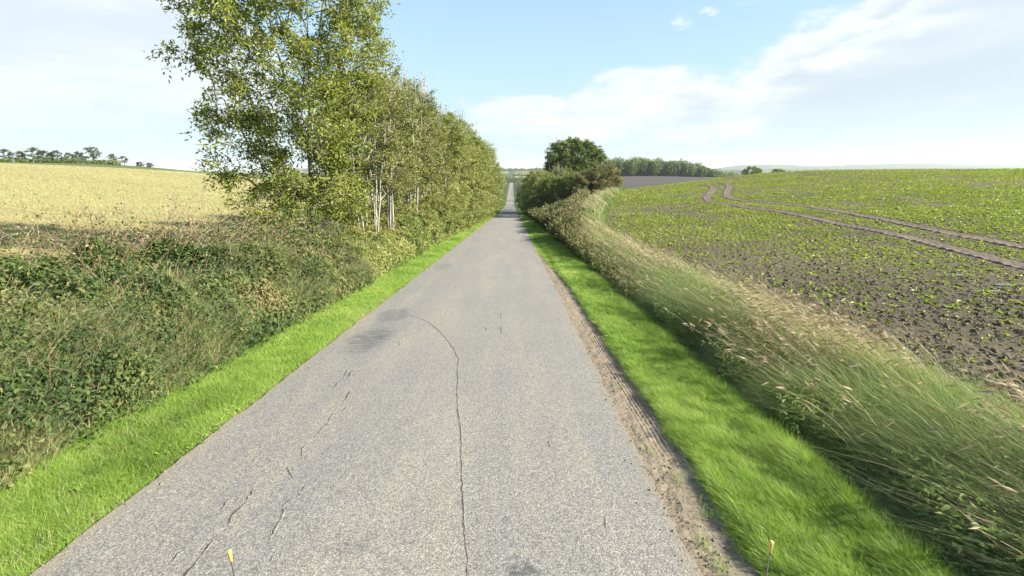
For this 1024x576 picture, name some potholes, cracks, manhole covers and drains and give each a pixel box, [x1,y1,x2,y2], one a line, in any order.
crack [165,331,410,576]
